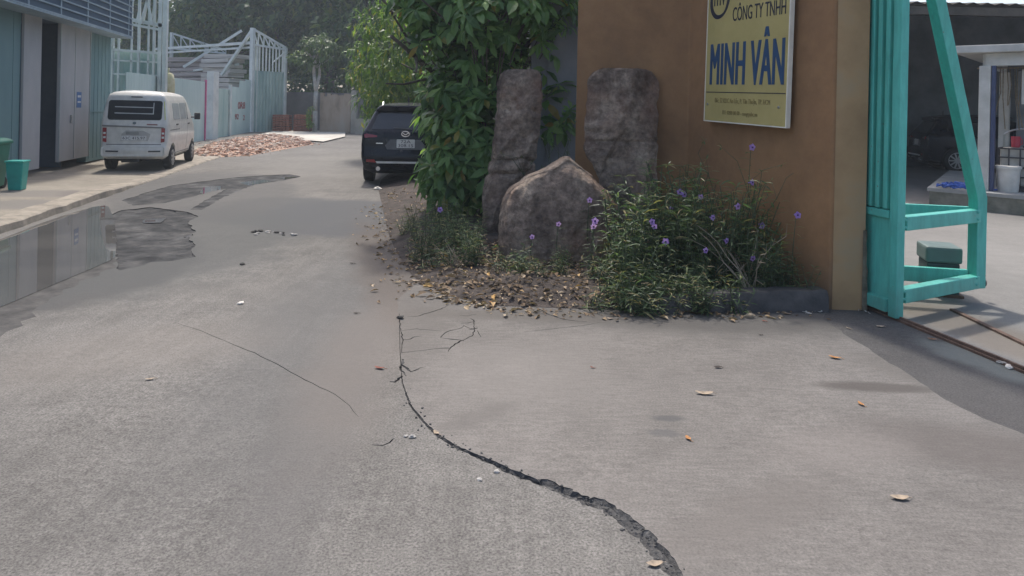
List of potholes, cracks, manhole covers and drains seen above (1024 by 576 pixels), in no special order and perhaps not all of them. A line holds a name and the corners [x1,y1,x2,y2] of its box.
crack [377,305,683,576]
crack [187,326,357,415]
